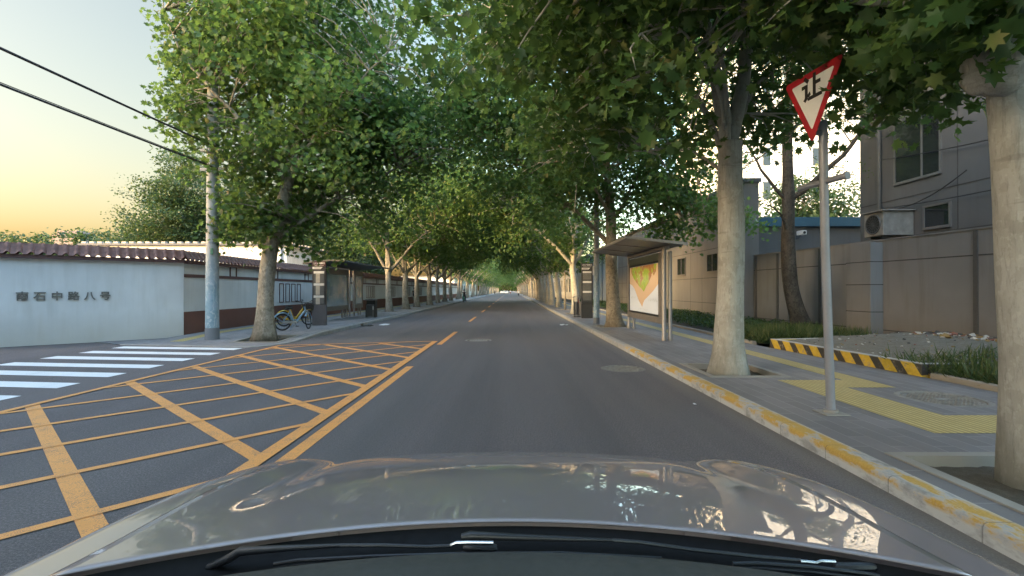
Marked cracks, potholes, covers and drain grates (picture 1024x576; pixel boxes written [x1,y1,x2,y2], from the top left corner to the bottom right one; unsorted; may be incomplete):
manhole cover [894,390,996,408]
